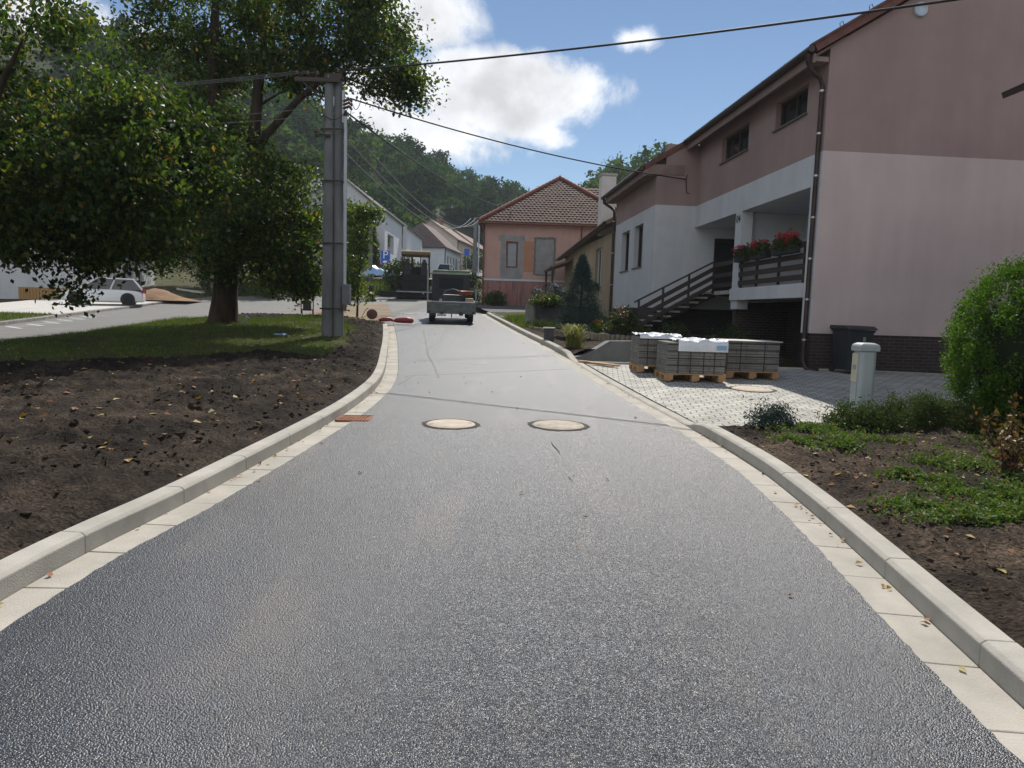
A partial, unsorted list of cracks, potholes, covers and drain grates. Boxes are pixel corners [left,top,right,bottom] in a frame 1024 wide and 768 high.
manhole cover [527,420,590,432]
manhole cover [422,419,480,430]
